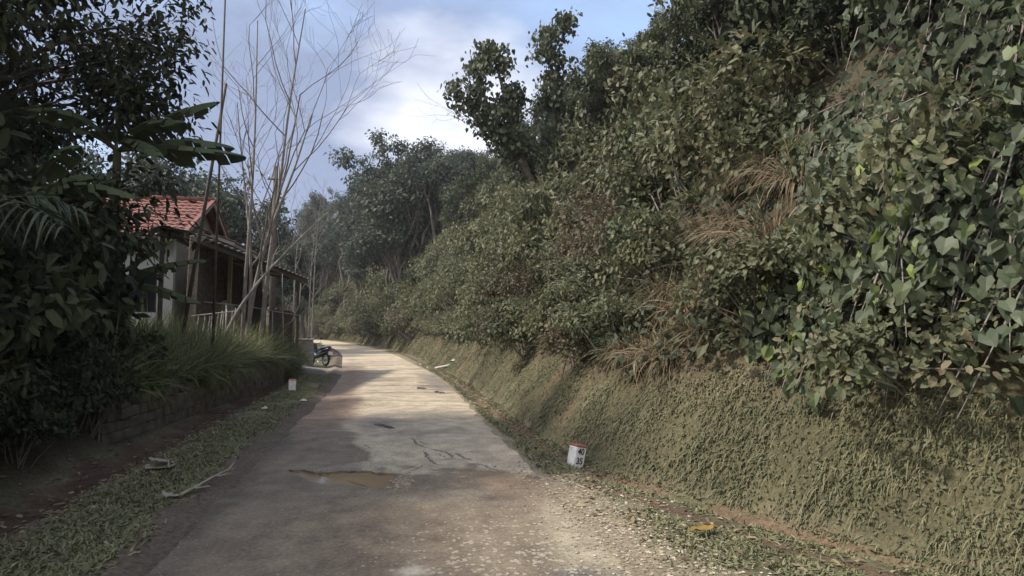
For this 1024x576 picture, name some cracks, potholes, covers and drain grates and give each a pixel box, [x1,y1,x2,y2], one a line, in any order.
pothole [289,470,399,488]
crack [409,438,511,475]
